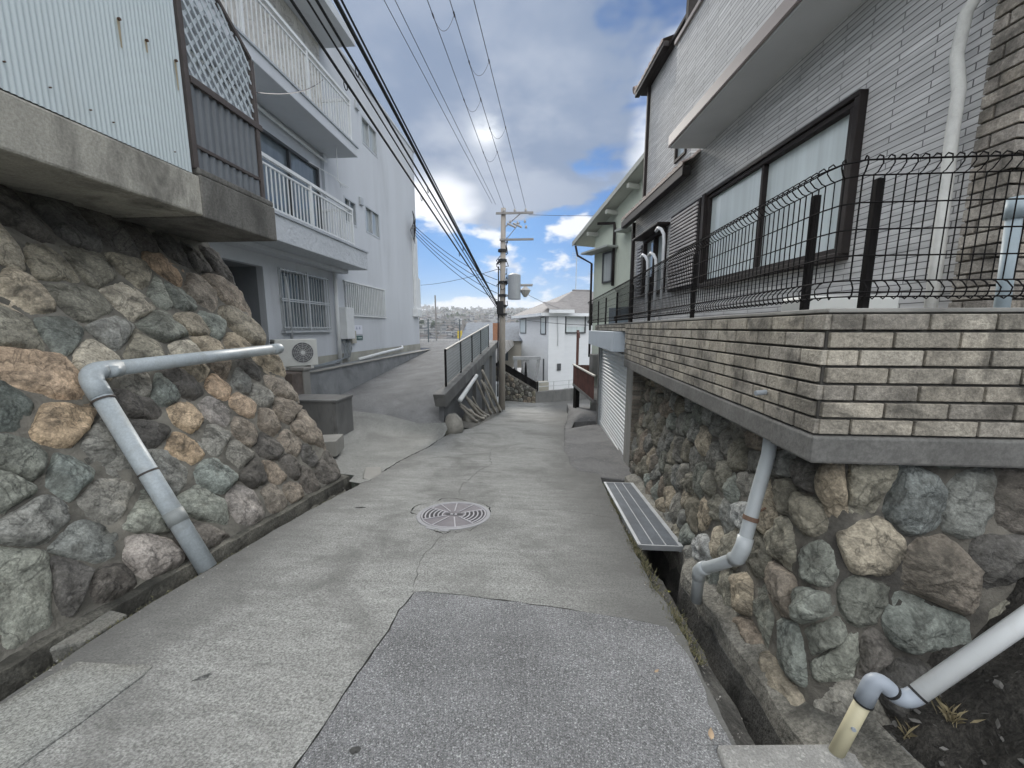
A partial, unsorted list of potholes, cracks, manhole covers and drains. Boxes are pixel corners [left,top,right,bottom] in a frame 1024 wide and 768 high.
crack [410,447,613,588]
manhole cover [416,501,491,531]
drain grate [603,482,684,552]
